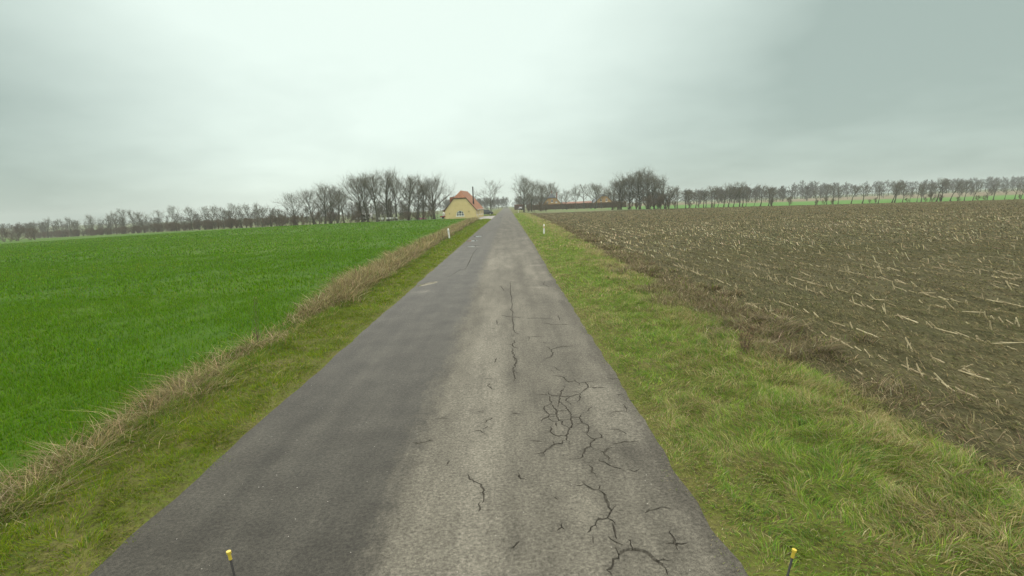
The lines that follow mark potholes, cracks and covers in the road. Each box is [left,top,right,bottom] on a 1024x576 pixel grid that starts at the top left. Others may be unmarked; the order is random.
crack [492,284,688,576]
crack [468,475,486,512]
